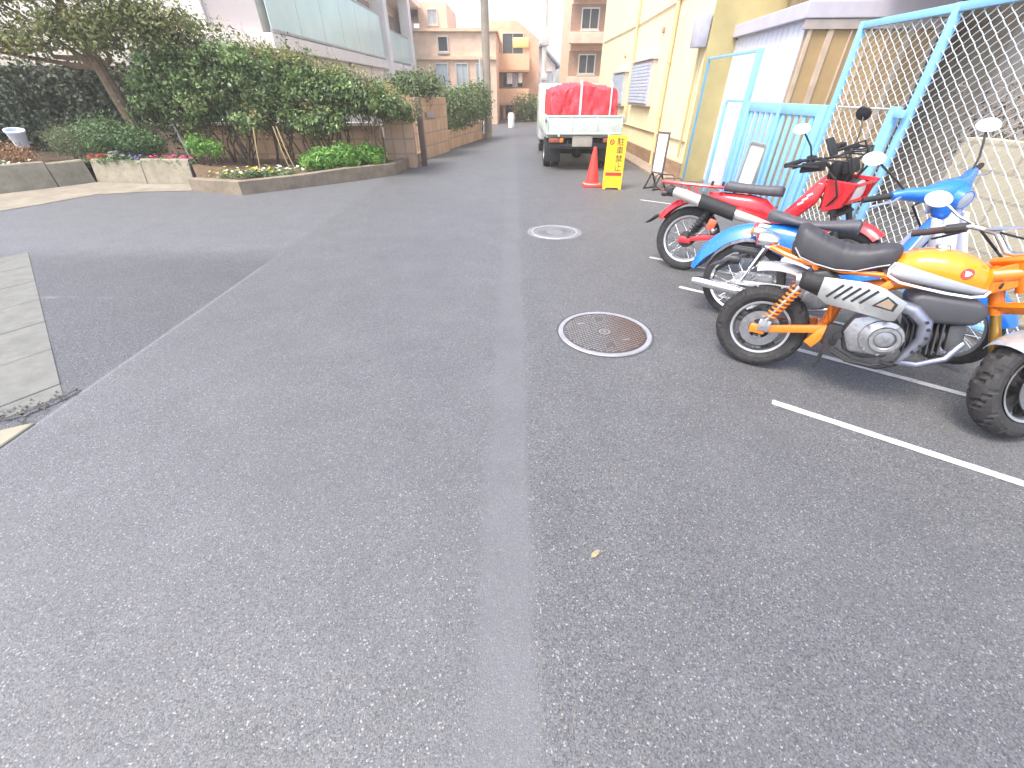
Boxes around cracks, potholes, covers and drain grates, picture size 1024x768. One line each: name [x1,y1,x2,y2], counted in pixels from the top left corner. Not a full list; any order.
manhole cover [556,311,654,358]
manhole cover [527,225,582,240]
